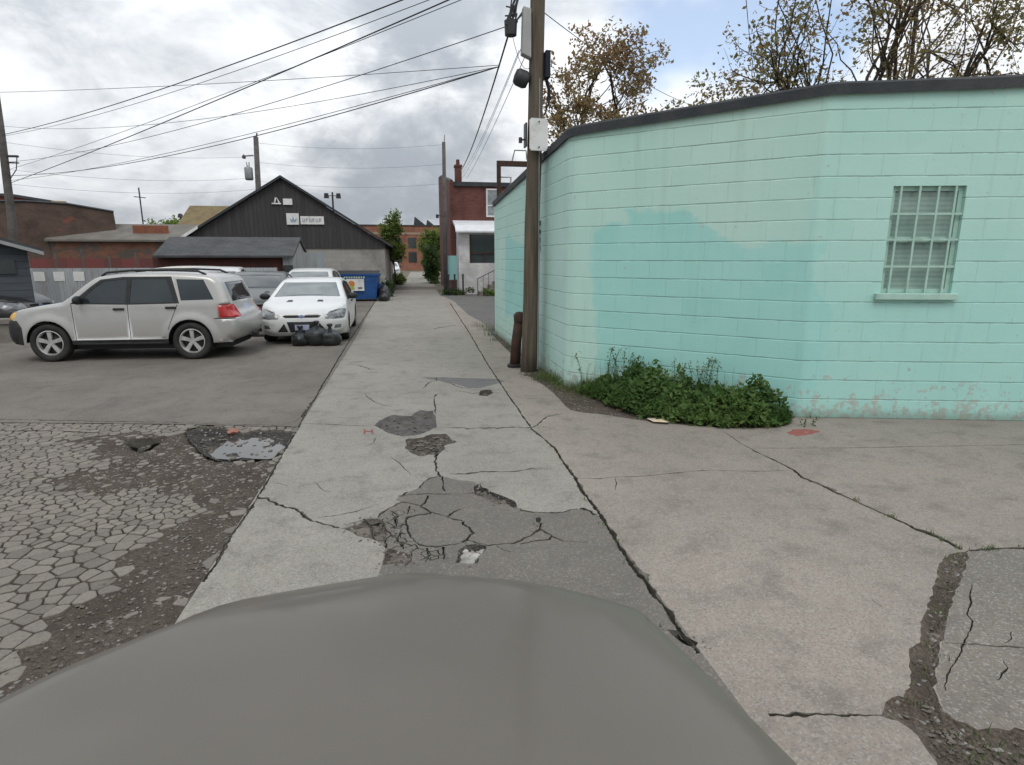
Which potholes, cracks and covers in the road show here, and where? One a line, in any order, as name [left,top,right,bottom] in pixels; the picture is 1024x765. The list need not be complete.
crack [944,585,1024,691]
pothole [128,438,162,453]
pothole [400,433,459,456]
pothole [186,428,294,462]
crack [574,470,784,488]
crack [0,397,596,699]
crack [419,376,565,430]
